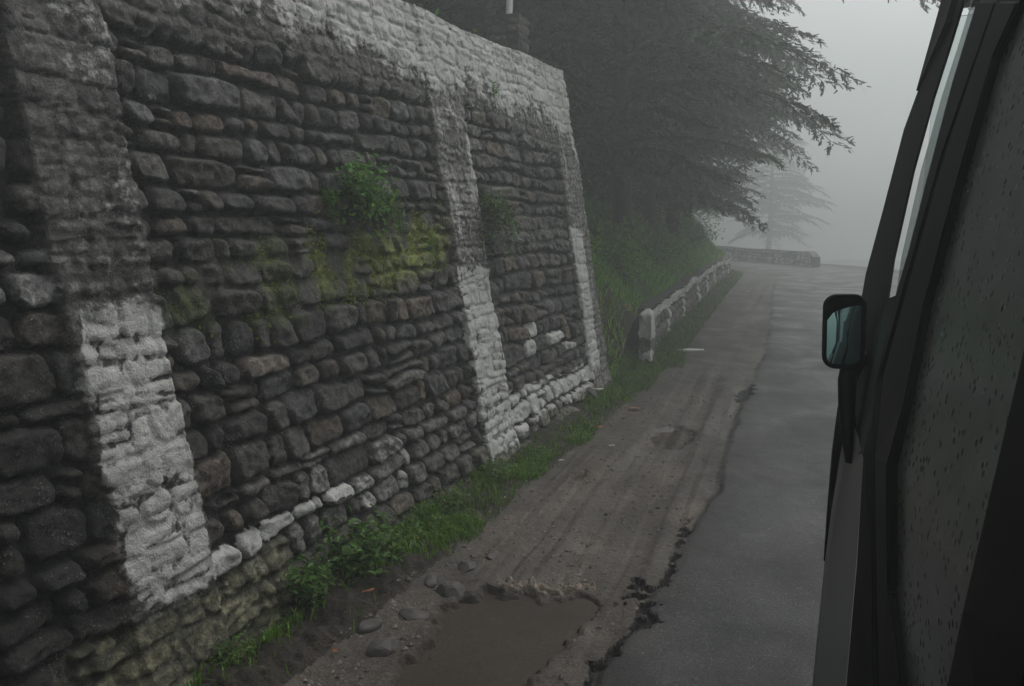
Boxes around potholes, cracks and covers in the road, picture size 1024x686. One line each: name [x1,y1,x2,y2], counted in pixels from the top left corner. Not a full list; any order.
pothole [643,426,699,450]
crack [583,517,693,686]
pothole [382,576,604,686]
